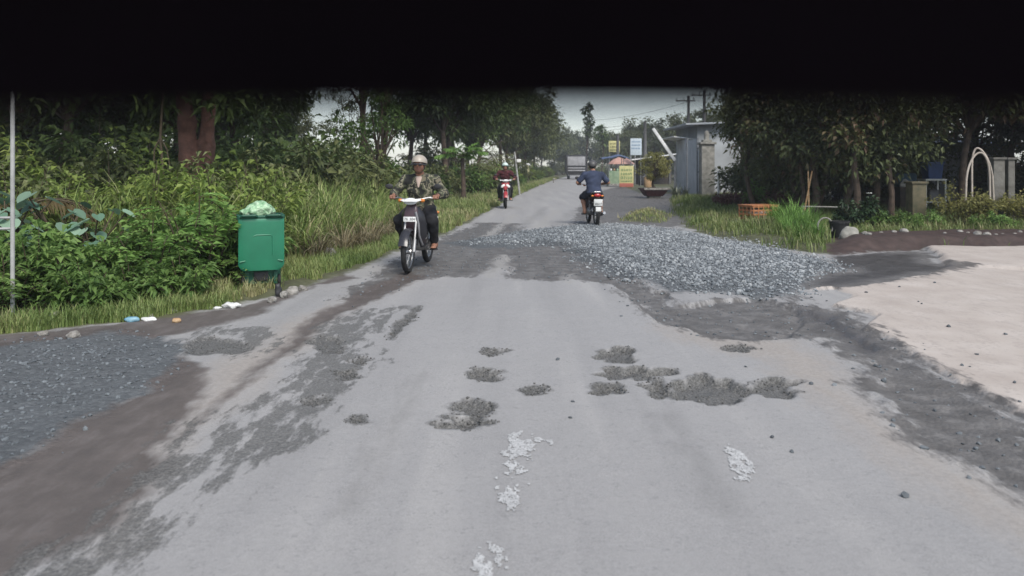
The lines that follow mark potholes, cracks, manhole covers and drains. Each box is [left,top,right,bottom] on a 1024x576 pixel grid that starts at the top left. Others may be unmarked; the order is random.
pothole [478,347,513,357]
pothole [743,376,809,399]
pothole [429,414,500,431]
pothole [592,365,680,383]
pothole [666,372,755,406]
pothole [636,377,674,399]
pothole [338,414,370,426]
pothole [462,365,504,383]
pothole [448,396,498,428]
pothole [588,381,629,396]
pothole [517,382,551,396]
pothole [719,344,763,353]
